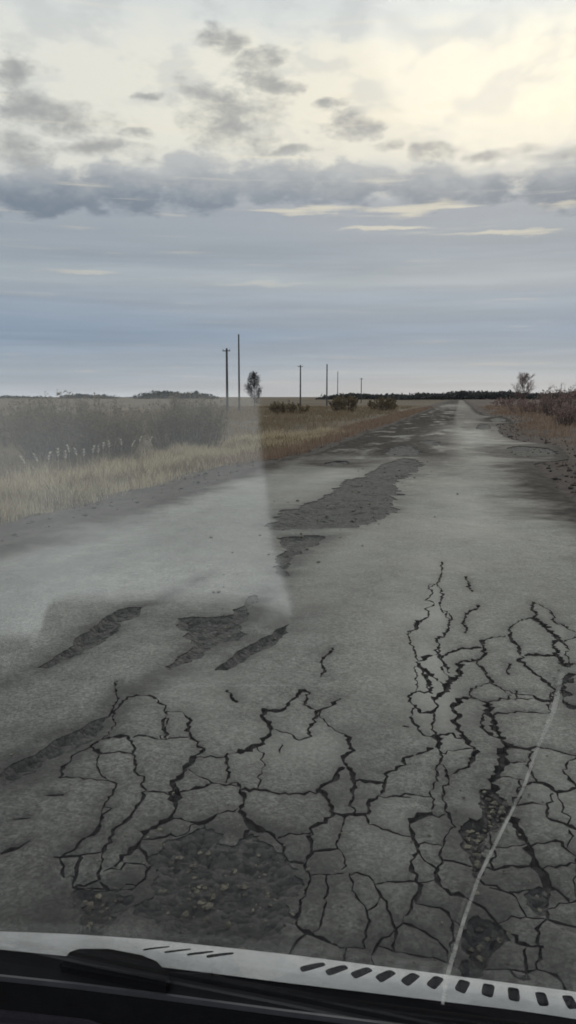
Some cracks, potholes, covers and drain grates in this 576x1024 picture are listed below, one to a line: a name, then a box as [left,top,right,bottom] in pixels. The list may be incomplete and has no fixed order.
crack [0,840,30,855]
pothole [37,607,142,669]
pothole [133,827,305,953]
pothole [165,595,258,670]
pothole [507,446,559,457]
pothole [459,915,511,979]
pothole [273,535,325,577]
pothole [380,445,422,457]
pothole [458,789,512,881]
pothole [215,624,289,670]
crack [45,562,576,991]
pothole [264,458,424,530]
